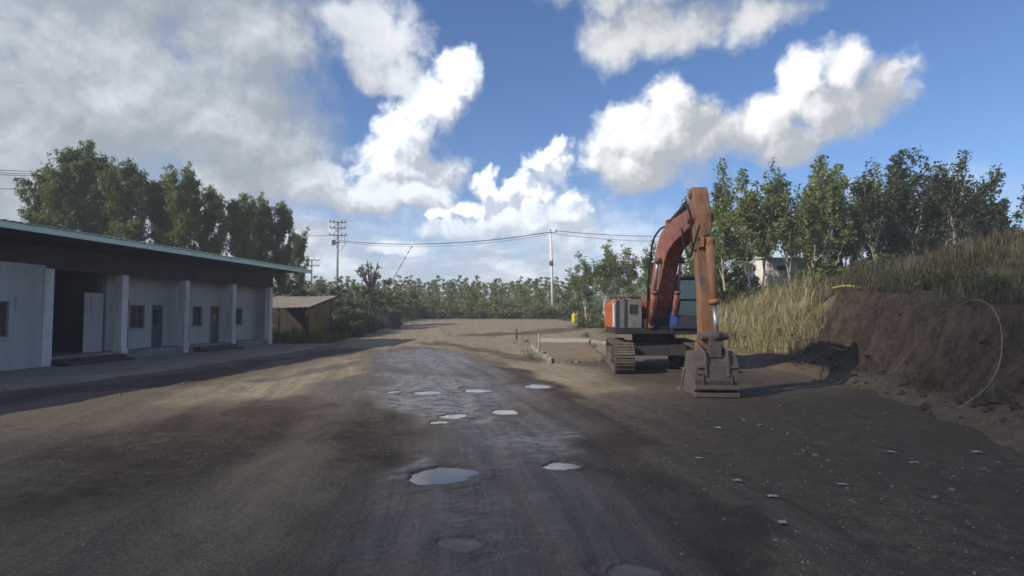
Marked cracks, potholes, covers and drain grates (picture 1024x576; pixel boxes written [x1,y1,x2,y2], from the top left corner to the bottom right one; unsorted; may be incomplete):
pothole [481,407,527,416]
pothole [529,458,595,473]
pothole [515,382,560,390]
pothole [421,531,498,559]
pothole [592,556,682,576]
pothole [383,460,503,493]
pothole [426,412,476,421]
